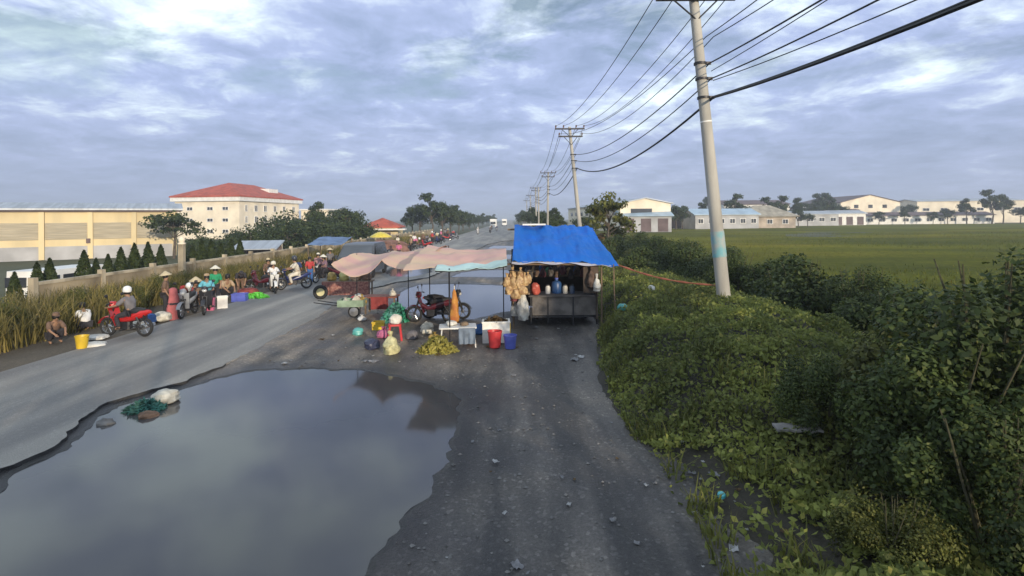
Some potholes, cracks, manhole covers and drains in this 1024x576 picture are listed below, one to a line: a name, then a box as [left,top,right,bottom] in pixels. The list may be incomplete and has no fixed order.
pothole [0,367,466,576]
